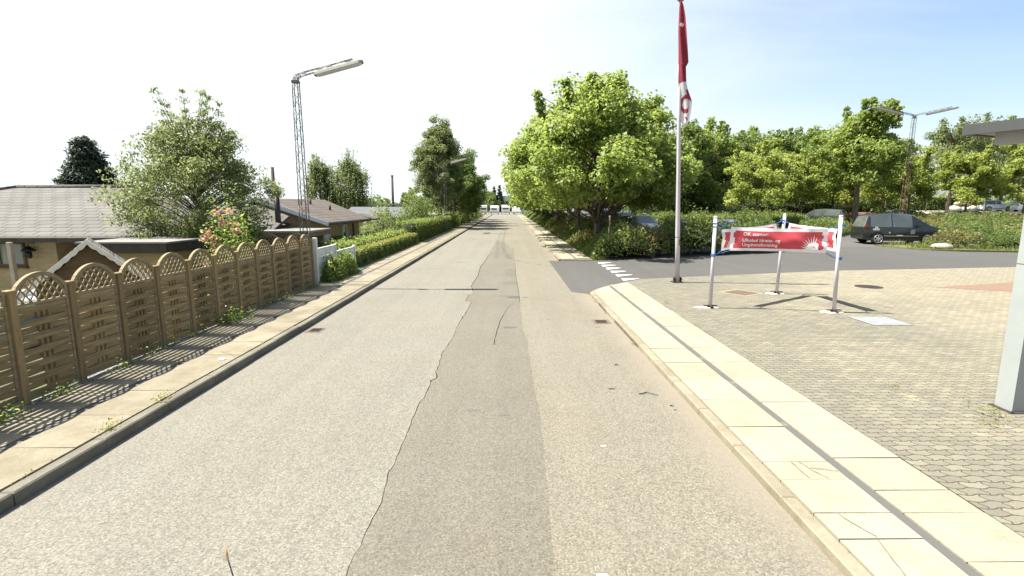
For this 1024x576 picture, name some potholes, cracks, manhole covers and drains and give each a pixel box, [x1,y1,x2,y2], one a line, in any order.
manhole cover [849,316,913,326]
crack [346,255,489,576]
crack [839,514,906,576]
